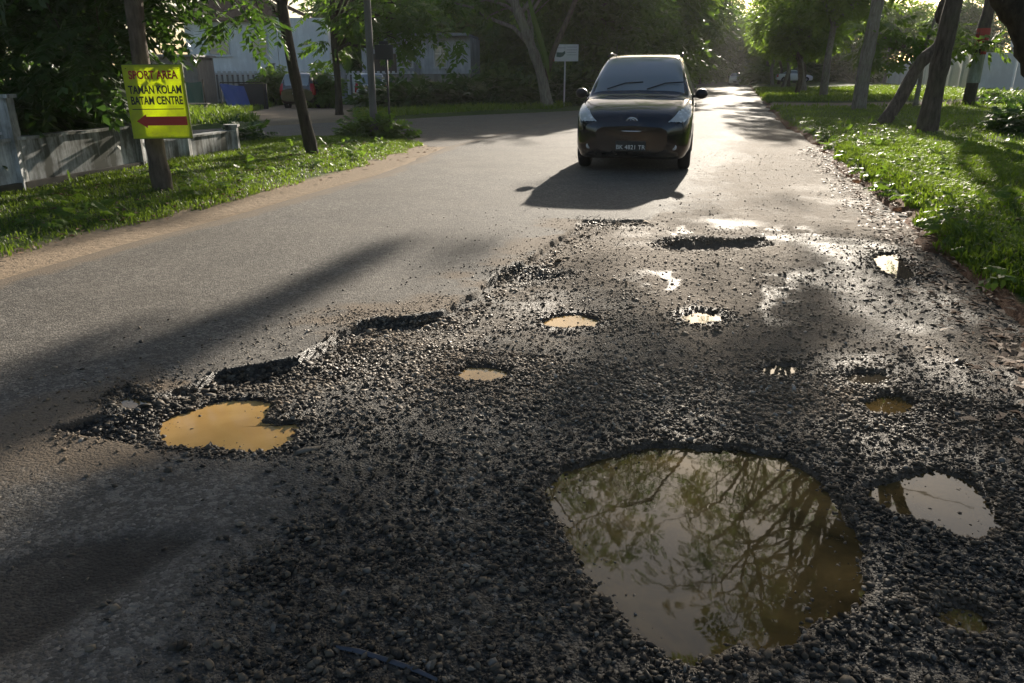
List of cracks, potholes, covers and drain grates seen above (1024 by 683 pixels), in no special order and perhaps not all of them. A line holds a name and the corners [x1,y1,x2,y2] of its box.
pothole [525,436,891,683]
pothole [530,310,608,332]
pothole [847,388,933,419]
pothole [198,356,307,393]
pothole [666,305,734,327]
pothole [744,358,825,380]
pothole [844,457,1024,550]
pothole [352,308,452,335]
pothole [864,250,931,282]
pothole [641,234,783,253]
pothole [146,393,319,458]
pothole [439,359,524,385]
